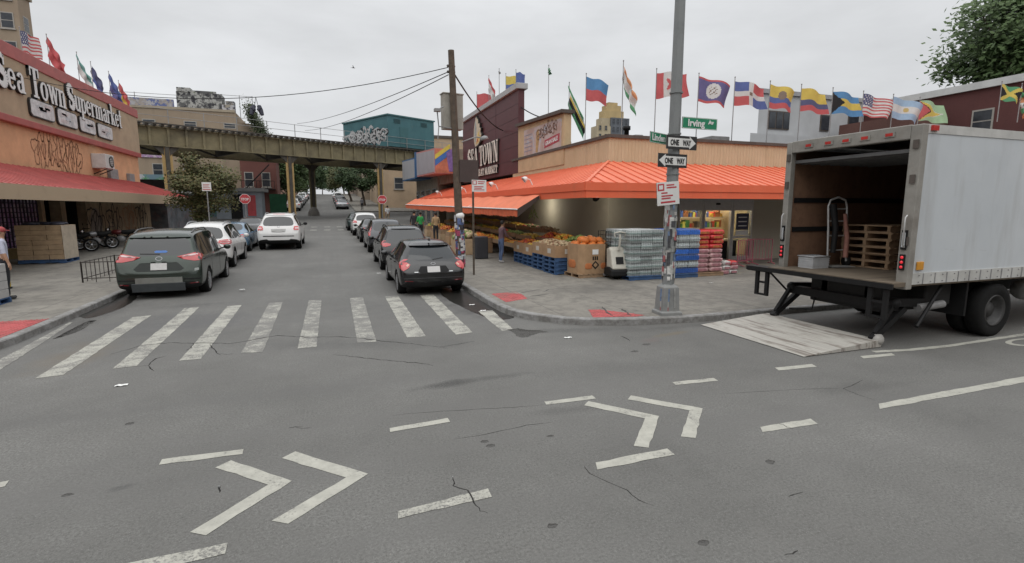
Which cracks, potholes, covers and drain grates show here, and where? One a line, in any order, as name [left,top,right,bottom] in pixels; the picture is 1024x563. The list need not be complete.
crack [585,468,651,505]
crack [453,479,487,513]
